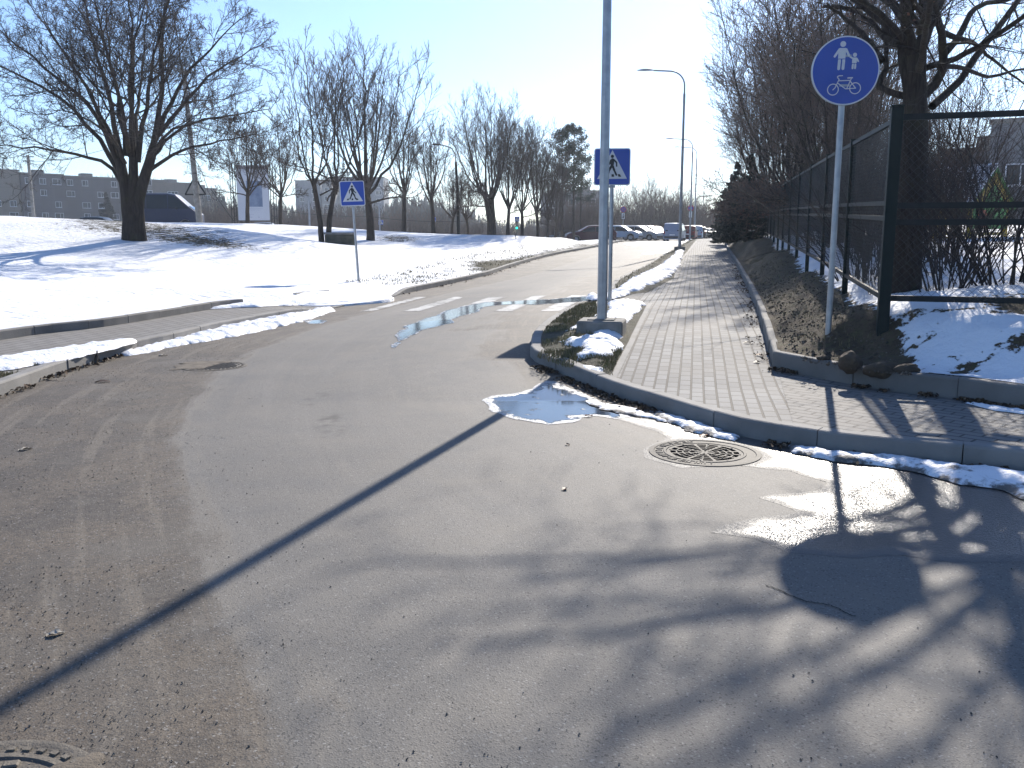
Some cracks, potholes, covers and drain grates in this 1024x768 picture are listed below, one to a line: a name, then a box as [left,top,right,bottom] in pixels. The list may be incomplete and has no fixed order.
crack [766,585,854,616]
manhole cover [0,740,104,768]
manhole cover [181,361,247,371]
